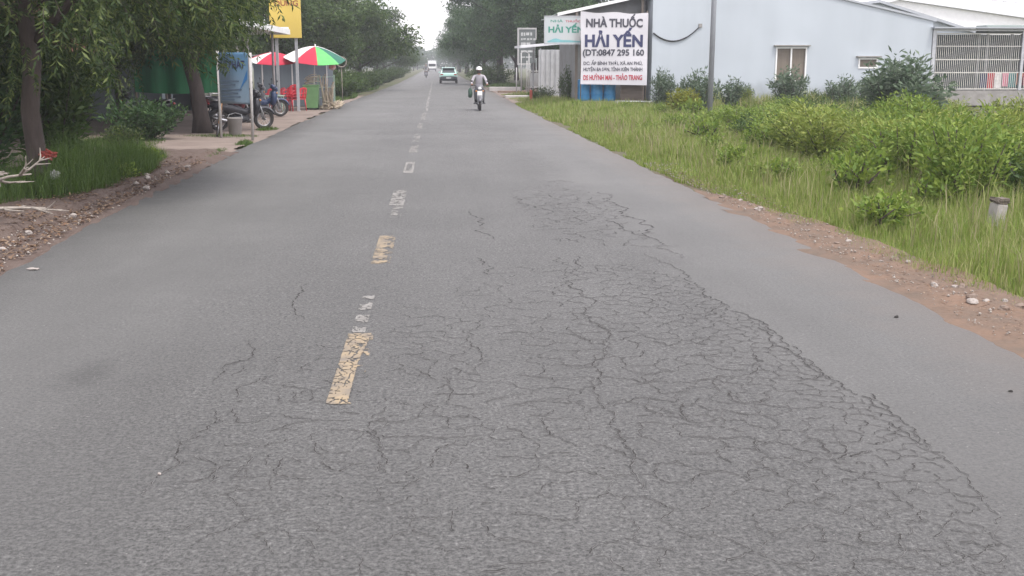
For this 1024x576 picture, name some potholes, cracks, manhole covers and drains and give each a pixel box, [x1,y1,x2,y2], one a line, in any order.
crack [513,181,684,274]
crack [468,209,494,239]
crack [491,254,1010,576]
crack [141,267,607,576]
